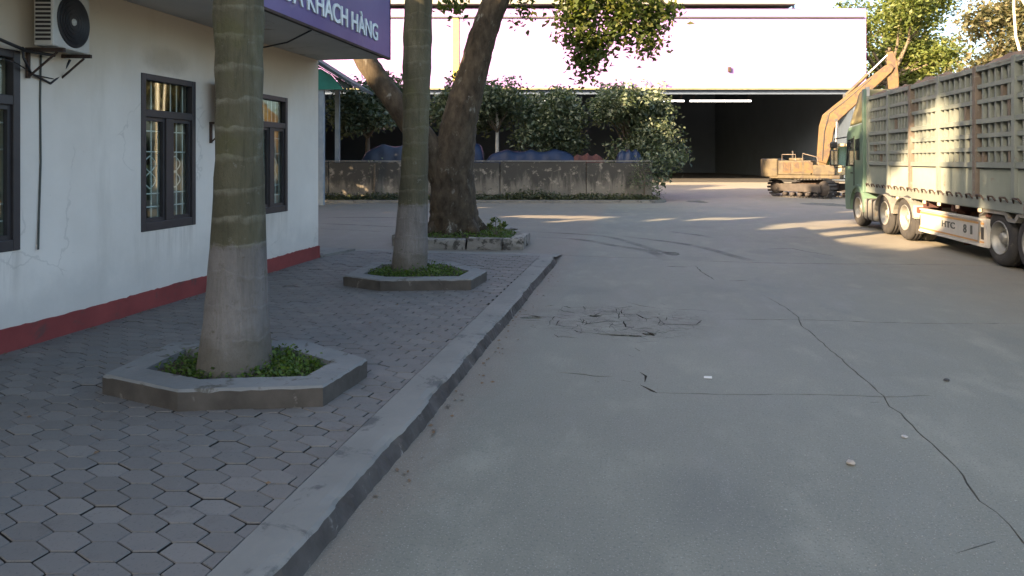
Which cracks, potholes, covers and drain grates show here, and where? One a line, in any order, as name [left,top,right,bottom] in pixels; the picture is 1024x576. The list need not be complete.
crack [560,372,657,393]
crack [513,303,703,350]
